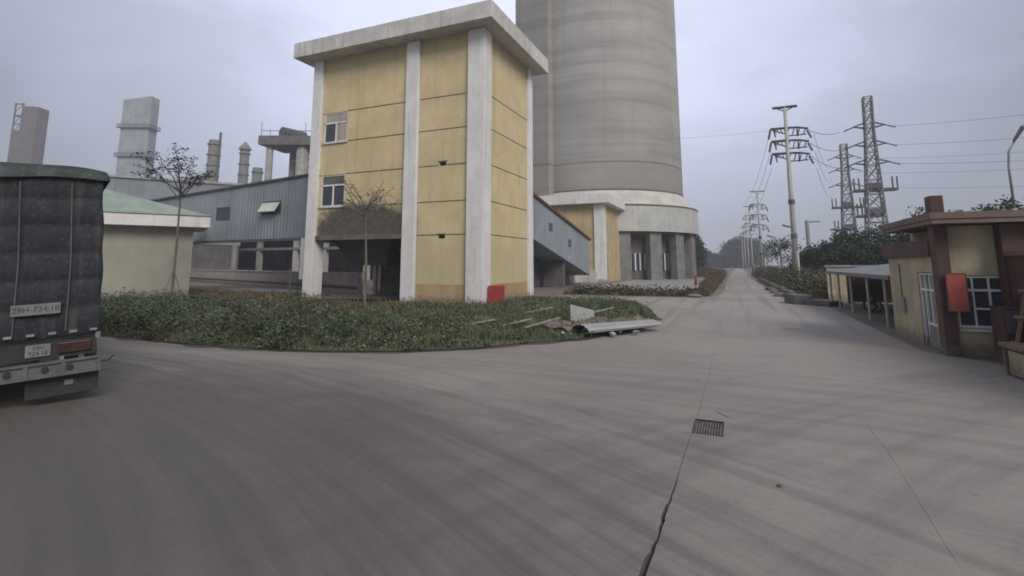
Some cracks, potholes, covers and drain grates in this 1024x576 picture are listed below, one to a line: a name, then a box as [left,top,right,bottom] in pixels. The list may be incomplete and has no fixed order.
drain grate [692,419,724,437]
crack [639,435,691,576]
